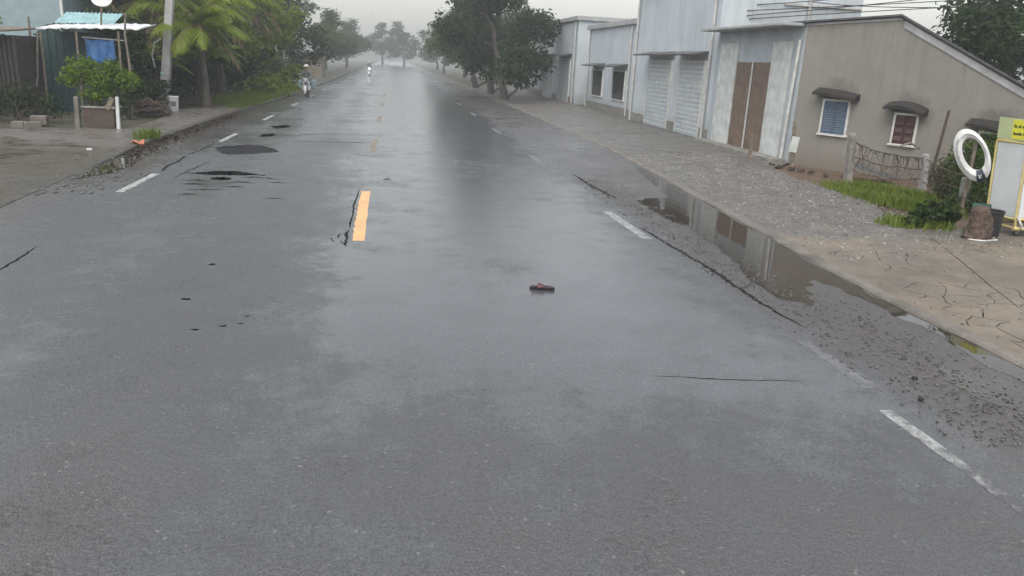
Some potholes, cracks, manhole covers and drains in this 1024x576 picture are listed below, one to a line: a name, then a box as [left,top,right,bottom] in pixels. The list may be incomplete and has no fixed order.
crack [0,247,35,270]
crack [162,143,282,199]
pothole [214,145,279,155]
crack [572,174,616,198]
crack [639,227,808,329]
crack [331,191,359,247]
